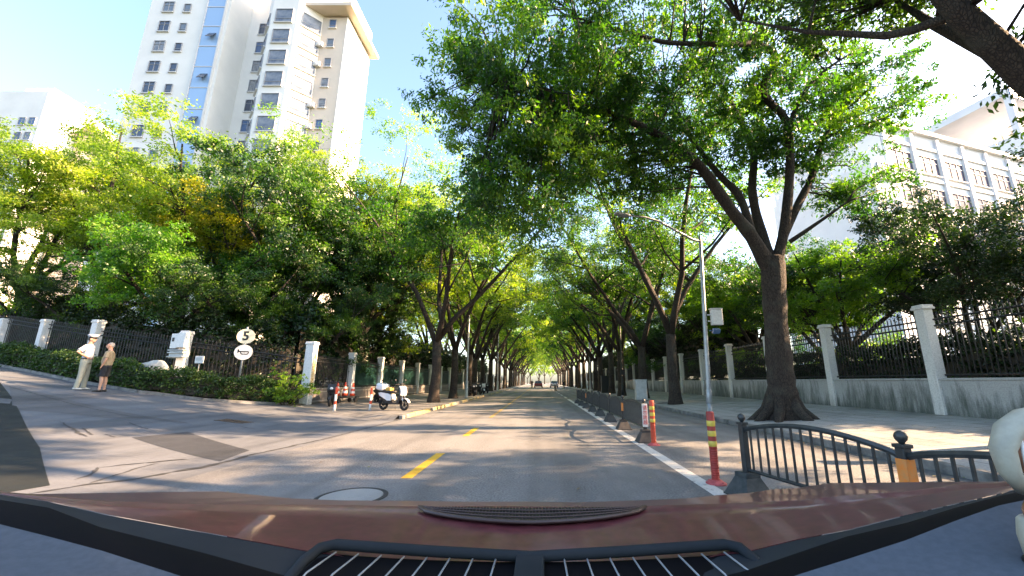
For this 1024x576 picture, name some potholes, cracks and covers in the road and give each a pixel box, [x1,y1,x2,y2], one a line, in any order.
manhole cover [314,487,388,501]
